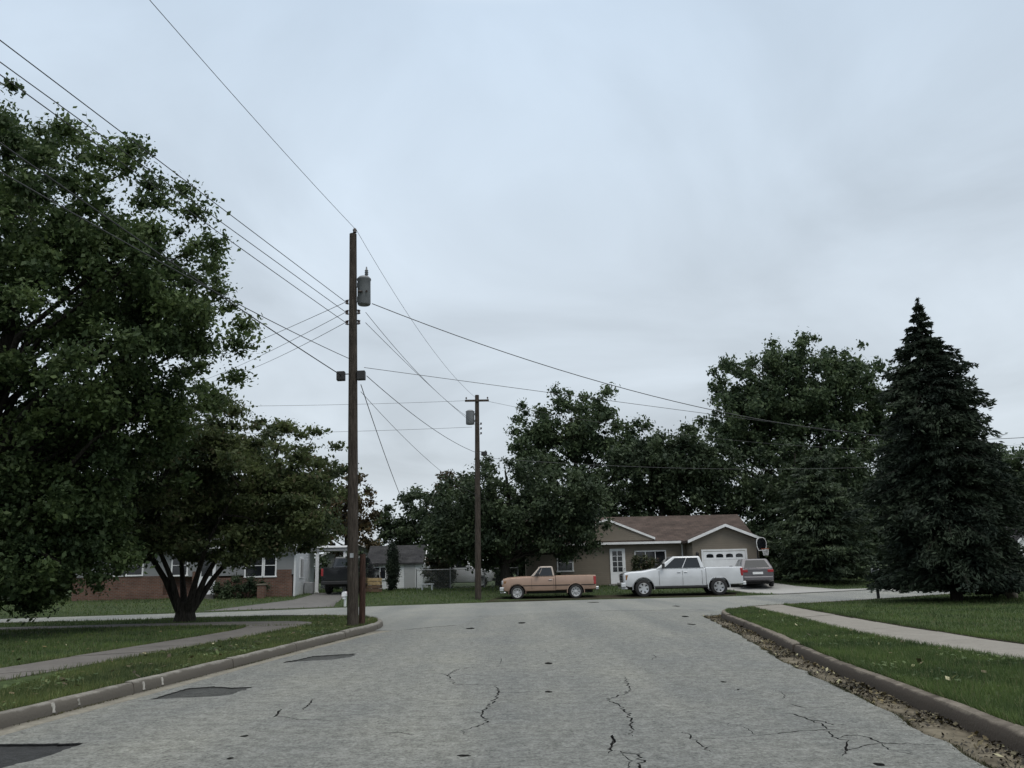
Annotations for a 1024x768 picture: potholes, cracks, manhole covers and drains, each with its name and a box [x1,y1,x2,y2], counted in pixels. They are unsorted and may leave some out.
crack [607,677,646,768]
crack [727,690,931,756]
crack [442,667,540,734]
crack [274,700,339,721]
